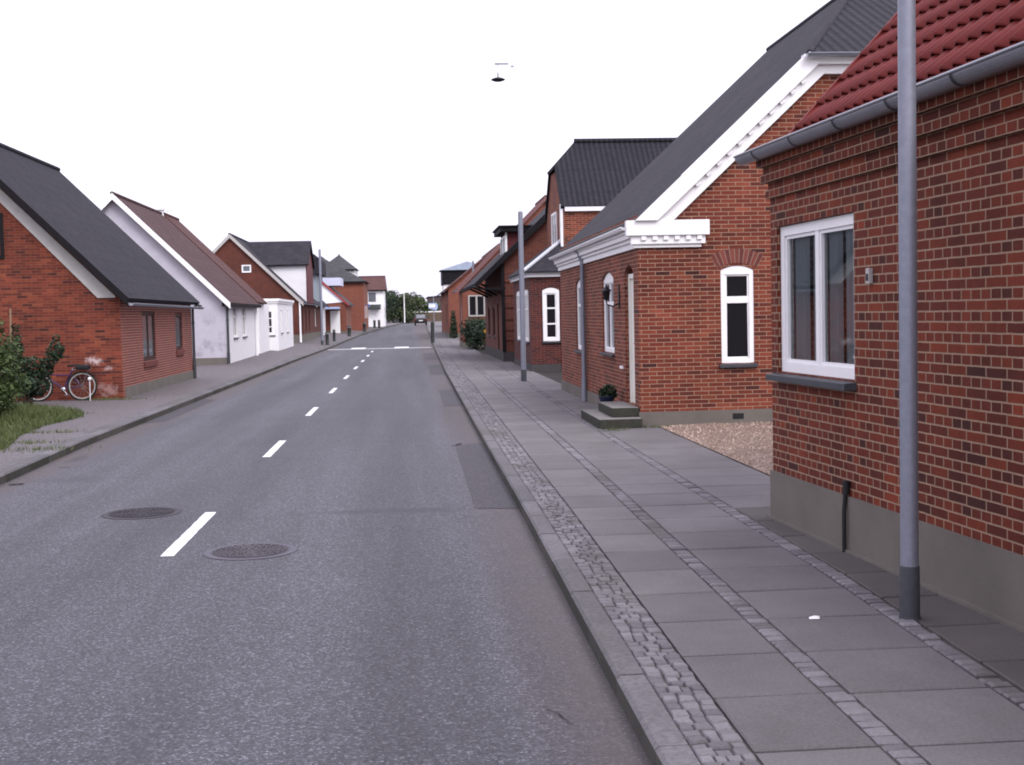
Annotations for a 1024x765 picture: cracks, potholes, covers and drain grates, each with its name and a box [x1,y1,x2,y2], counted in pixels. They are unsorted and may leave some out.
manhole cover [203,543,297,560]
manhole cover [101,507,182,519]
